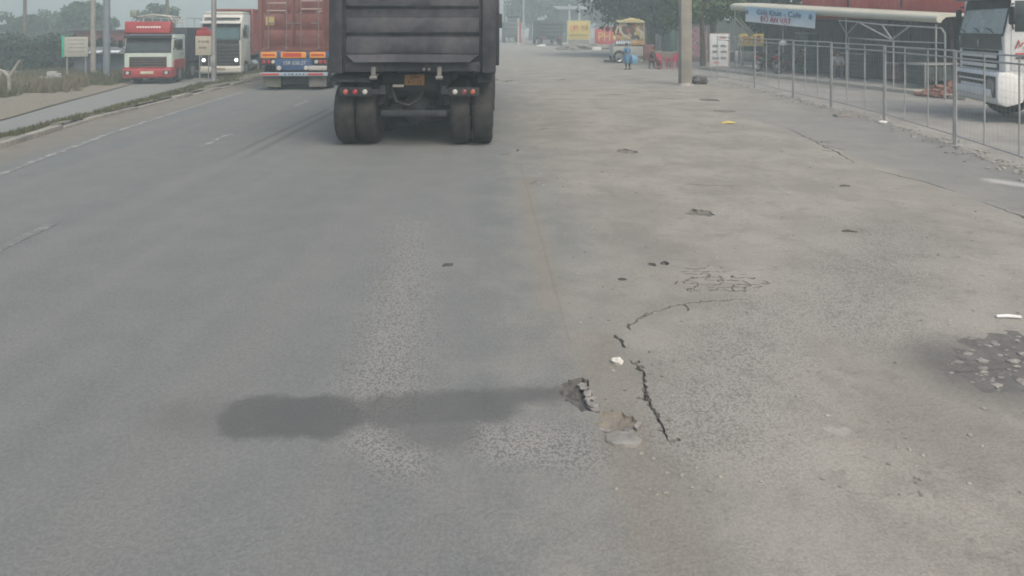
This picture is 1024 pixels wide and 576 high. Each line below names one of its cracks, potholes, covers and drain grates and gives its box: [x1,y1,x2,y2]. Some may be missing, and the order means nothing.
pothole [685,209,714,217]
pothole [943,330,1024,393]
pothole [559,377,600,413]
crack [790,129,1024,218]
crack [614,265,770,444]
